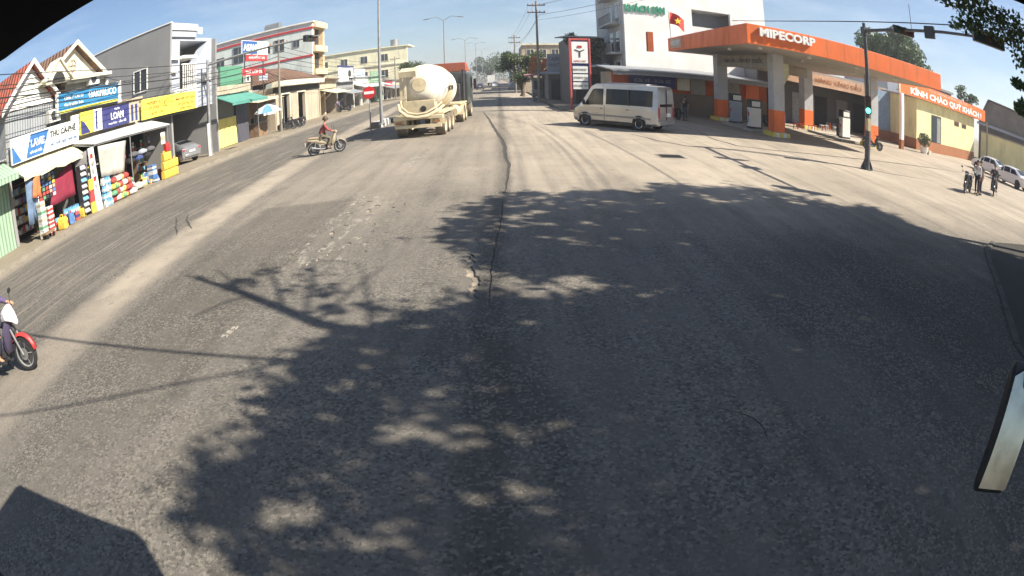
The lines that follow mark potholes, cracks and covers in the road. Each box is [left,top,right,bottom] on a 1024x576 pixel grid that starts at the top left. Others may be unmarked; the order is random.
crack [483,112,511,303]
pothole [462,253,481,299]
crack [711,406,768,440]
